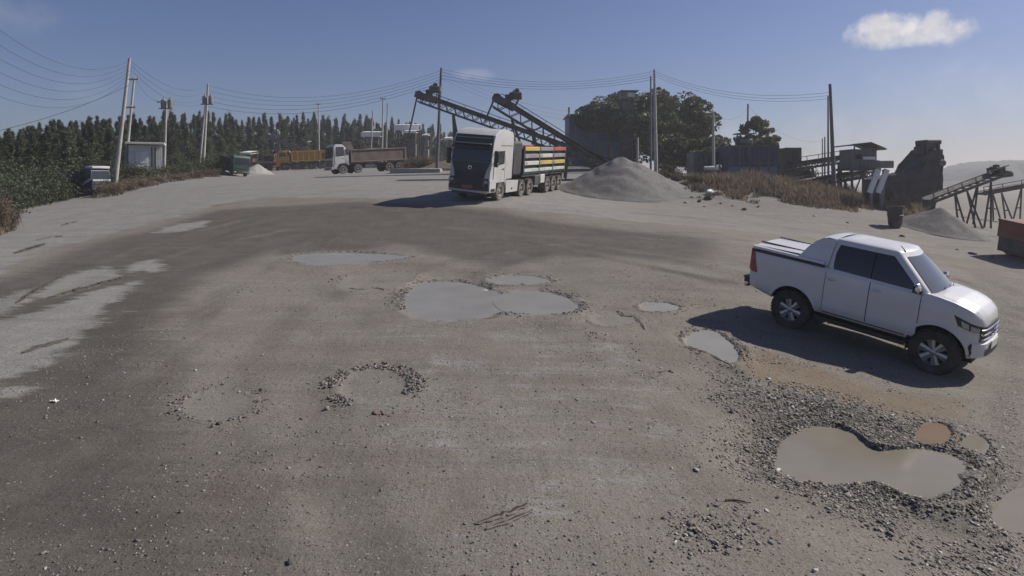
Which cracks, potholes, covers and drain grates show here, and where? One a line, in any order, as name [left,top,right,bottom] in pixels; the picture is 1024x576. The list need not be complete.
pothole [632,299,693,315]
pothole [276,250,426,267]
pothole [493,285,593,318]
pothole [476,272,562,289]
pothole [676,326,757,369]
pothole [740,398,1018,539]
pothole [384,276,515,329]
crack [616,310,645,329]
pothole [308,359,438,411]
pothole [158,382,274,427]
